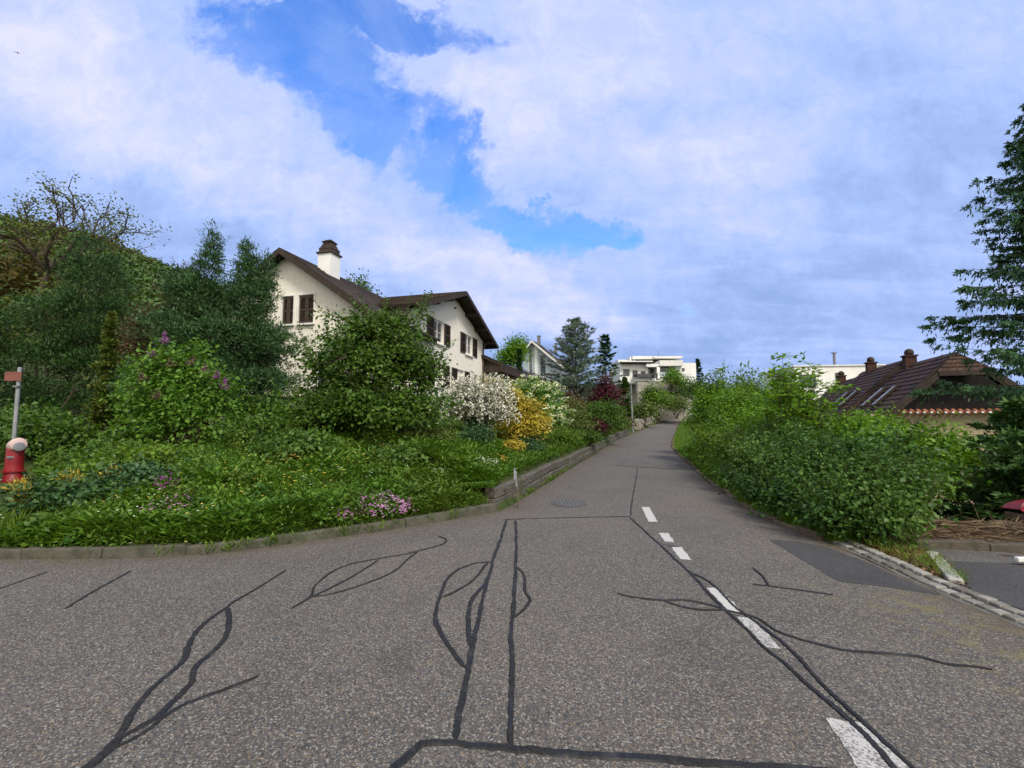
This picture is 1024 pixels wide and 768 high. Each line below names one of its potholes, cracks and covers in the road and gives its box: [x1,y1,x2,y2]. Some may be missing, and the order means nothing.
manhole cover [551,499,587,507]
